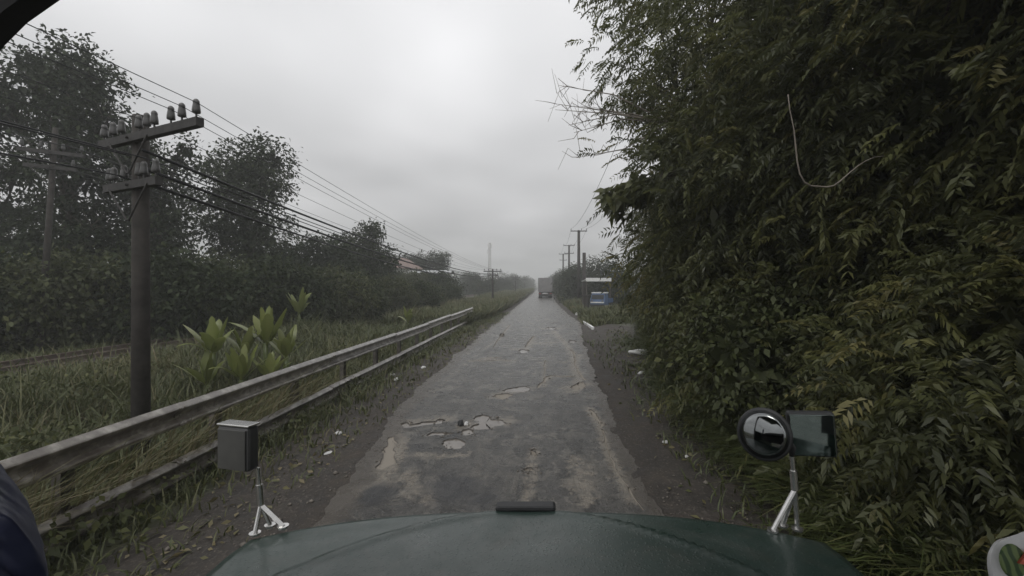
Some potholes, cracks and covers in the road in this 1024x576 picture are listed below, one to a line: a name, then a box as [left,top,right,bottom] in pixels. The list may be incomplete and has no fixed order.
pothole [401,419,445,428]
pothole [441,438,466,449]
pothole [471,414,507,430]
pothole [375,436,398,469]
